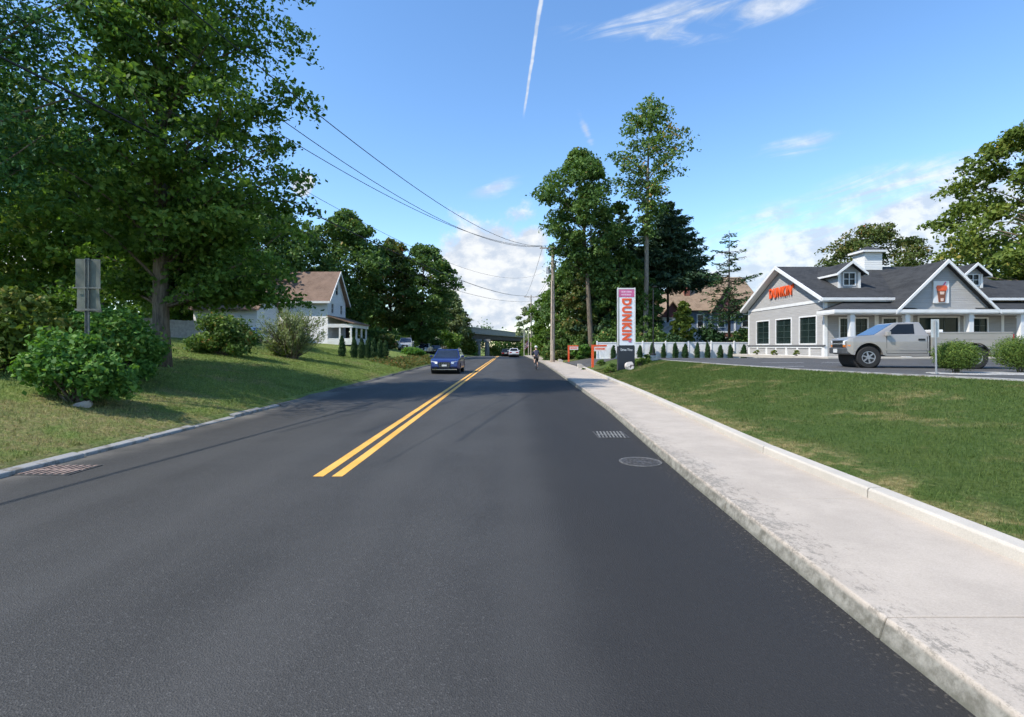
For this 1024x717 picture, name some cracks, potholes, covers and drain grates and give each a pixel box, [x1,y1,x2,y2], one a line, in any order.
manhole cover [619,457,662,467]
drain grate [12,465,103,476]
